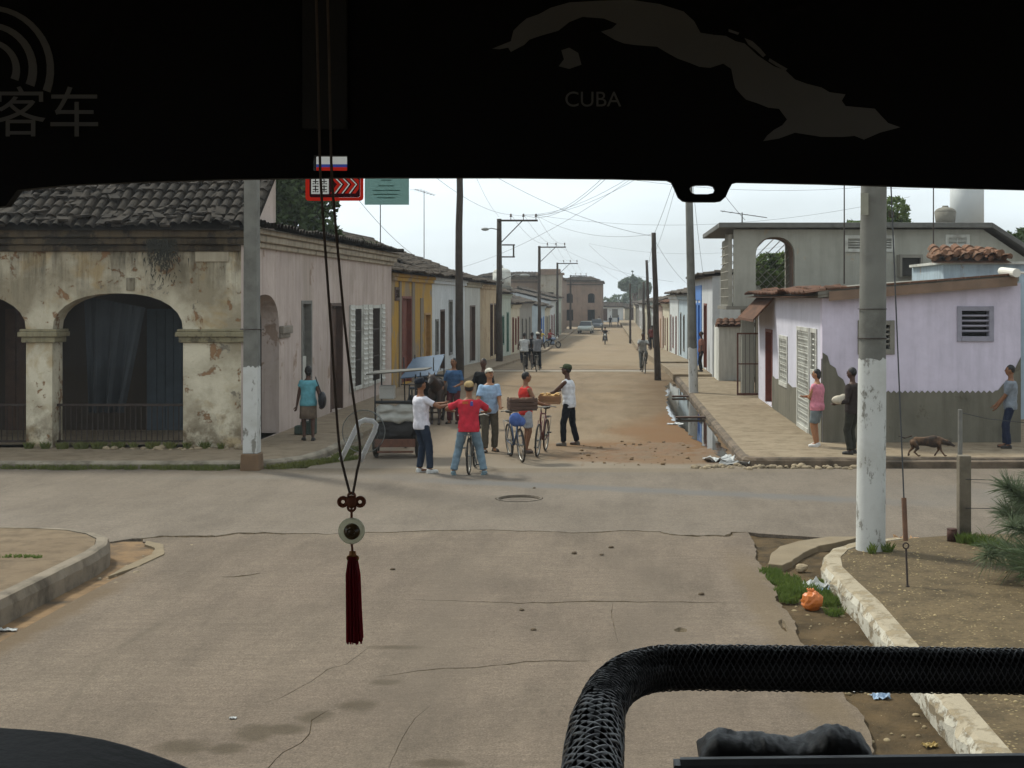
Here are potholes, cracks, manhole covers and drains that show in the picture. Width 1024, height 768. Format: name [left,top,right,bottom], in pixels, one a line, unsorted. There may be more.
crack [140,530,742,542]
crack [402,661,573,674]
crack [494,601,696,643]
